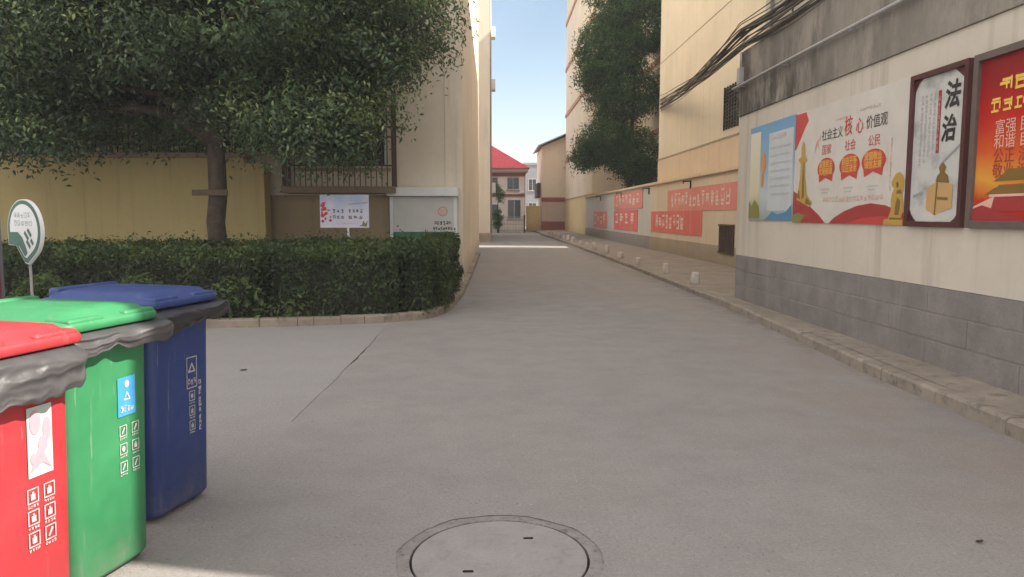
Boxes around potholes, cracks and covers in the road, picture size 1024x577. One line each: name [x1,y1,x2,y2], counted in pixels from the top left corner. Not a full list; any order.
manhole cover [396,515,604,577]
crack [299,333,380,414]
